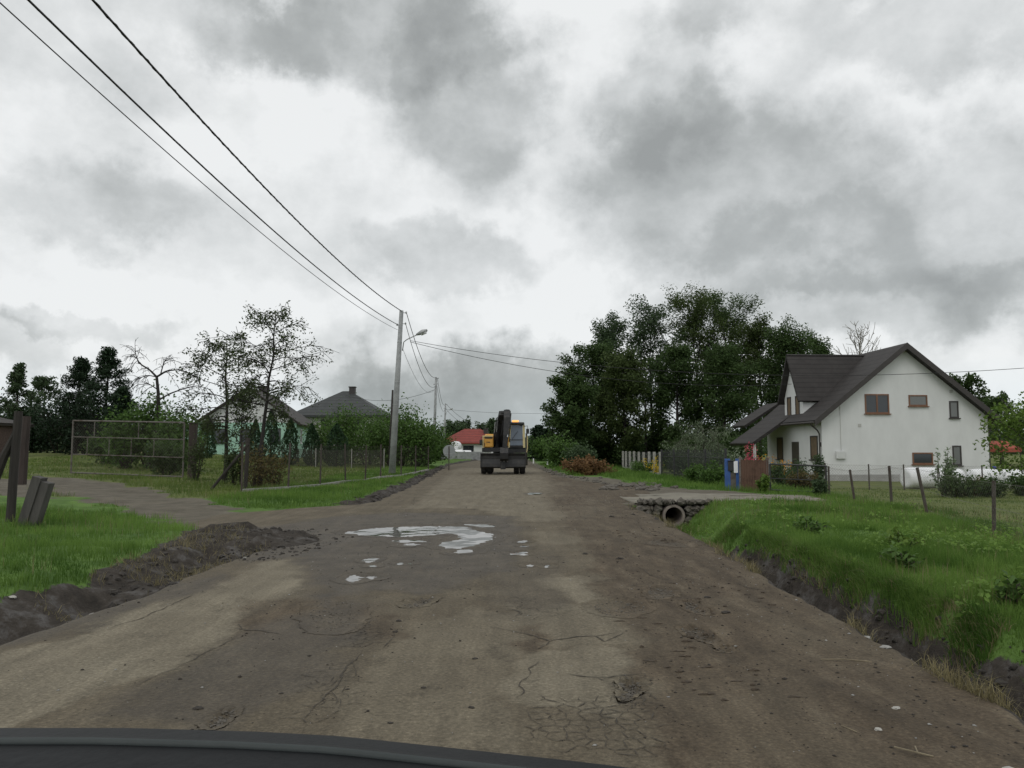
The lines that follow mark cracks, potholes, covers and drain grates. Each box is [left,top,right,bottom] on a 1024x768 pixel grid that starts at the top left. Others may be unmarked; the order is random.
crack [494,597,623,649]
crack [517,662,671,757]
pothole [330,522,510,555]
pothole [614,677,648,704]
crack [289,620,404,723]
